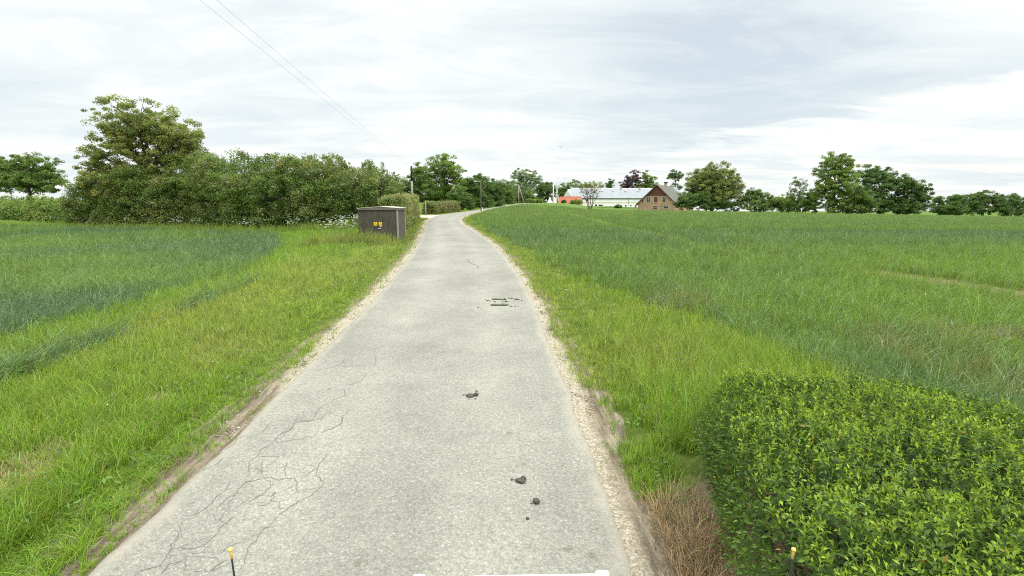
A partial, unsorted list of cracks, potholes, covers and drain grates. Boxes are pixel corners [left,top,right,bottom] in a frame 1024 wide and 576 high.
crack [134,349,376,575]
